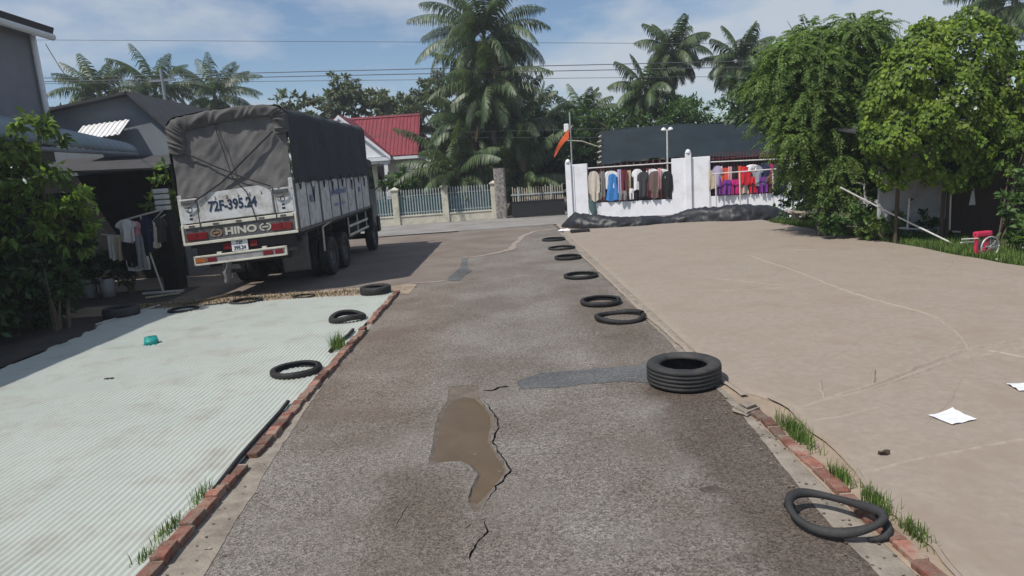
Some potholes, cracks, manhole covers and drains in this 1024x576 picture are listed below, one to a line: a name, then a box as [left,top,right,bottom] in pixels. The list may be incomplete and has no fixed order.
pothole [429,385,507,512]
crack [464,386,512,563]
